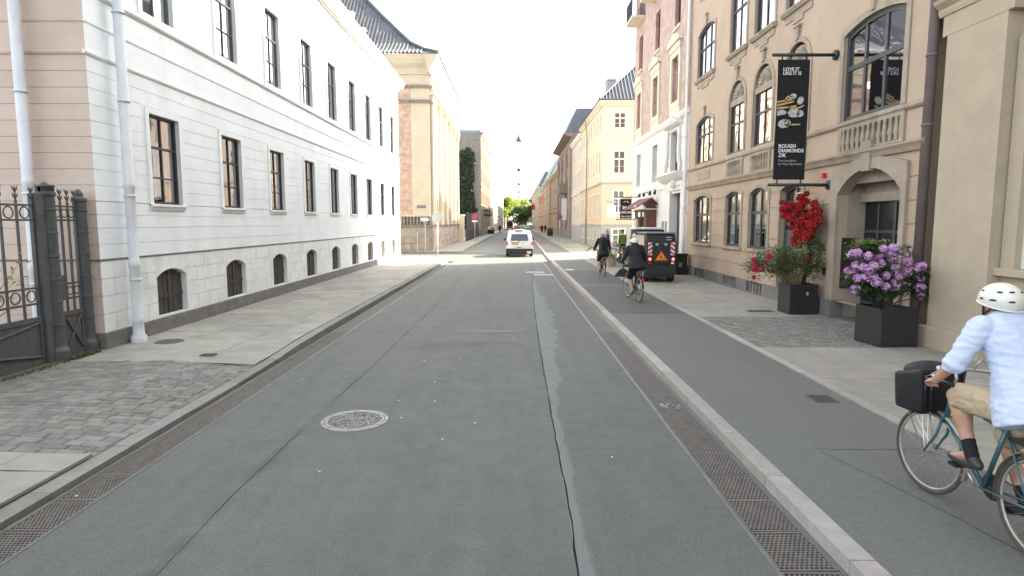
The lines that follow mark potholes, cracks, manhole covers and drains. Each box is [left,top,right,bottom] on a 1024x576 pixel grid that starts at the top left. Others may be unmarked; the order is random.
drain grate [645,394,684,406]
drain grate [676,435,728,453]
manhole cover [320,410,389,432]
drain grate [726,500,802,532]
drain grate [804,395,841,403]
drain grate [624,367,656,375]
drain grate [690,453,749,475]
drain grate [750,532,839,572]
drain grate [637,384,674,395]
drain grate [630,375,664,384]
drain grate [654,406,697,419]
drain grate [664,419,712,435]
